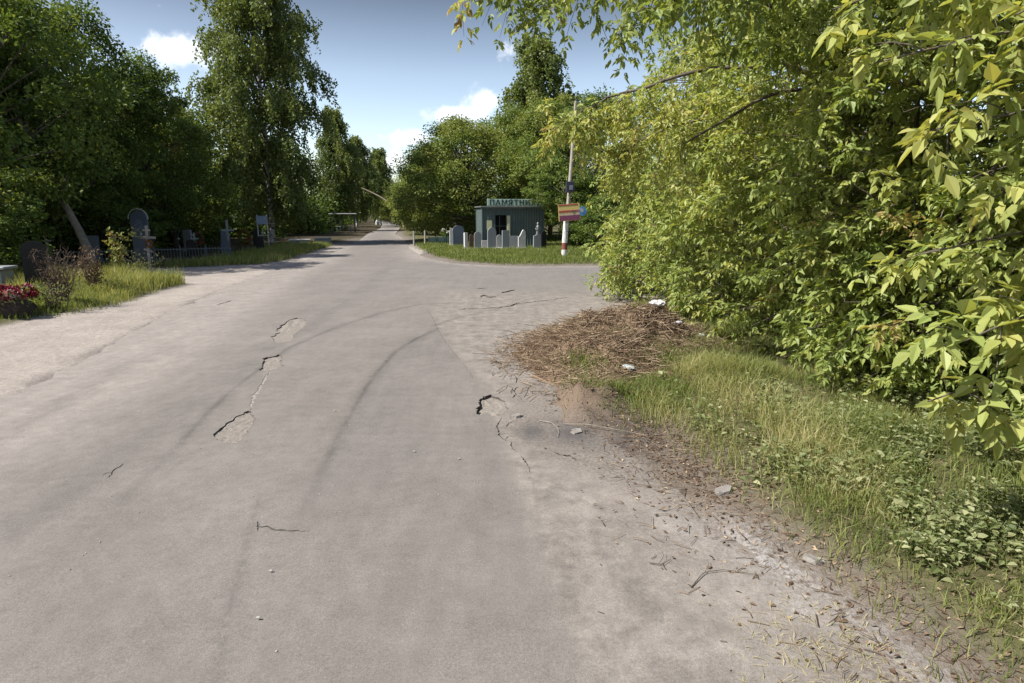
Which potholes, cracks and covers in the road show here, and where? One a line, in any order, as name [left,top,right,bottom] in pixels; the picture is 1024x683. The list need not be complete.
crack [496,418,530,472]
pothole [259,354,284,372]
crack [459,290,567,331]
pothole [270,318,307,344]
pothole [213,411,255,443]
pothole [476,395,509,417]
crack [257,522,303,532]
